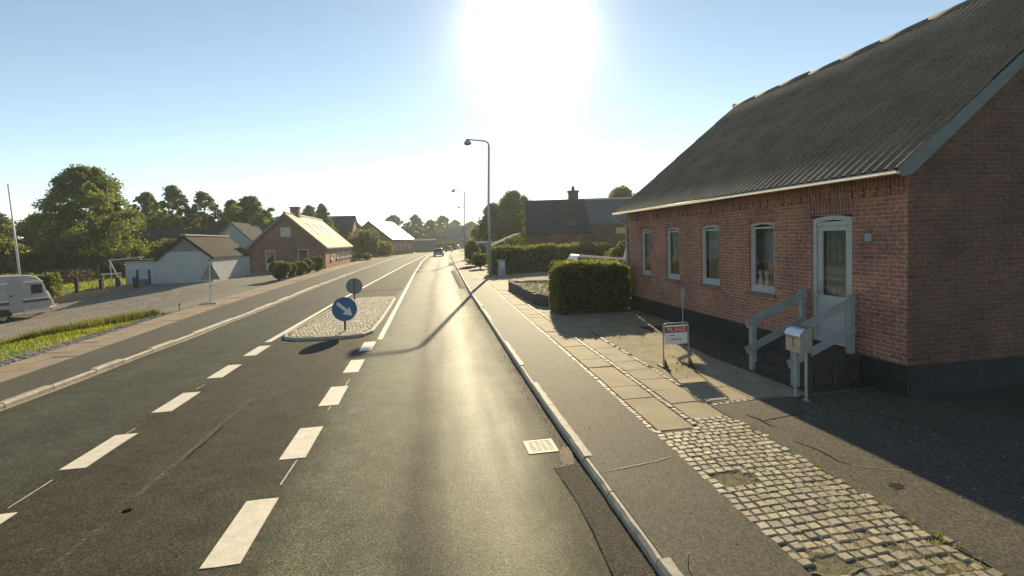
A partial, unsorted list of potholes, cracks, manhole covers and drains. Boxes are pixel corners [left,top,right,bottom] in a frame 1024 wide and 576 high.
pothole [711,471,761,488]
crack [137,399,252,496]
drain grate [523,439,559,455]
crack [794,441,918,473]
